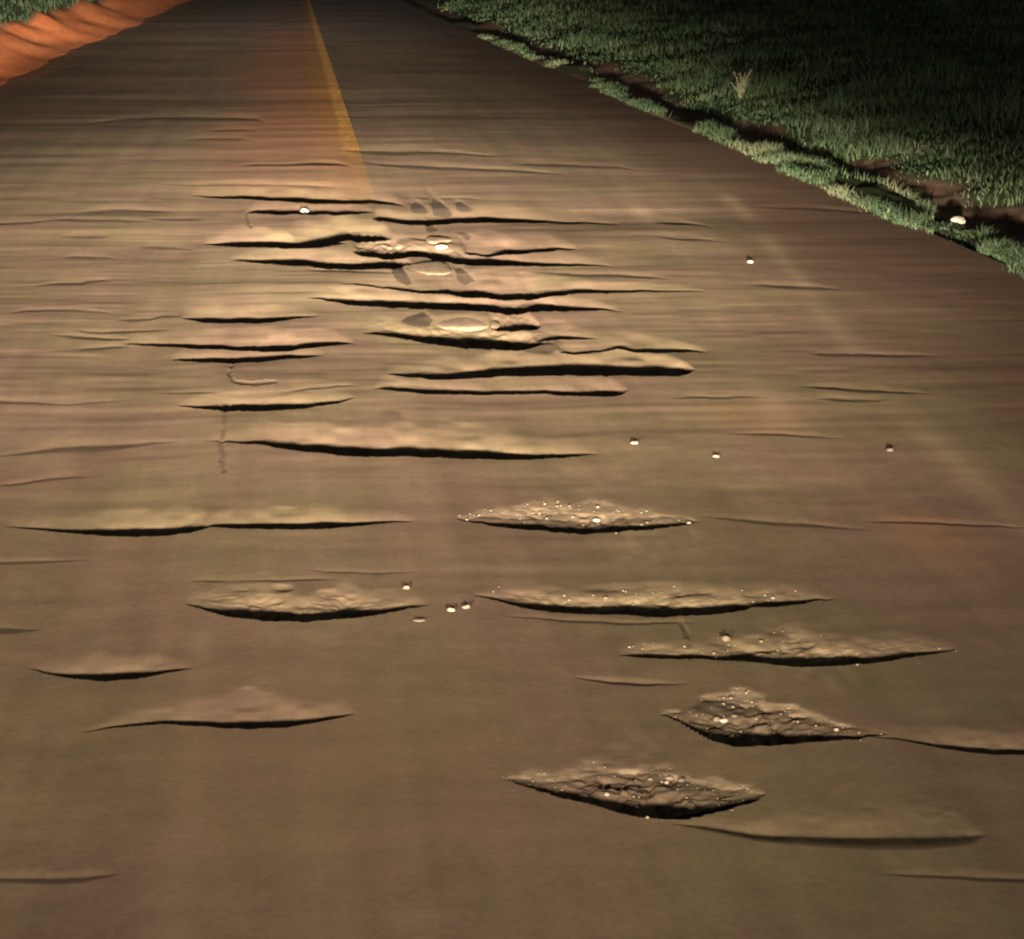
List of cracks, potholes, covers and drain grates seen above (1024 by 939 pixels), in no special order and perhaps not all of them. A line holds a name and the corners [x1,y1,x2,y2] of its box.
crack [720,430,847,439]
